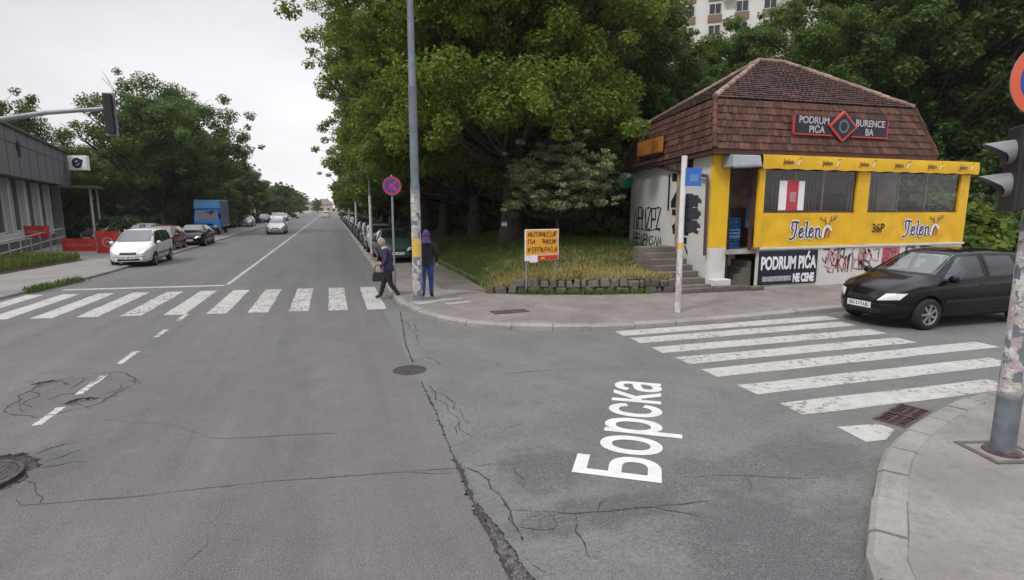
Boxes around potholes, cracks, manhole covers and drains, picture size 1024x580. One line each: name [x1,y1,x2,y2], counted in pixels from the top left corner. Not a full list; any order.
crack [112,420,328,439]
crack [15,442,455,505]
crack [693,475,809,490]
manhole cover [0,460,26,489]
drain grate [872,403,932,428]
crack [3,371,140,418]
manhole cover [393,365,427,375]
crack [510,498,710,557]
